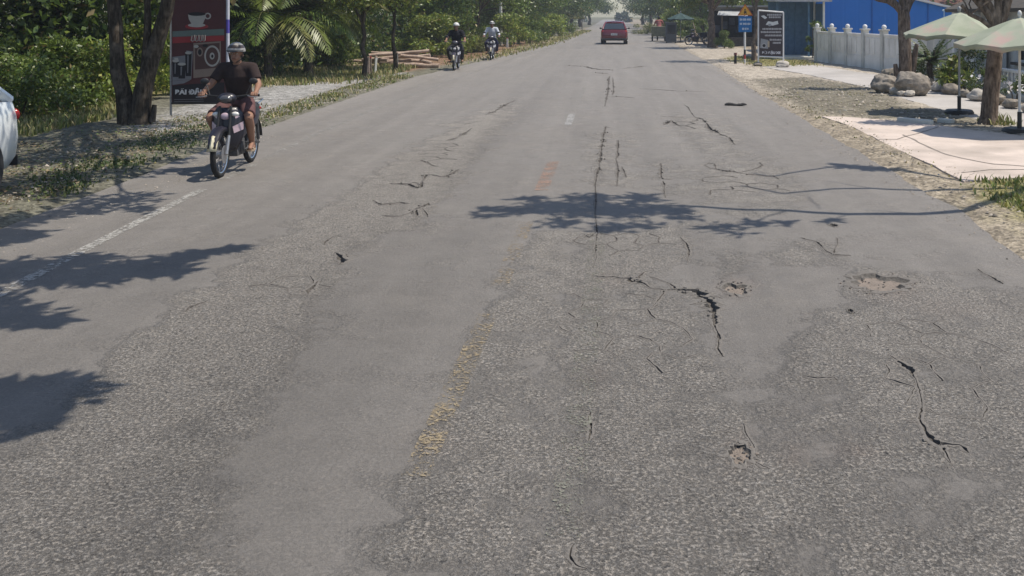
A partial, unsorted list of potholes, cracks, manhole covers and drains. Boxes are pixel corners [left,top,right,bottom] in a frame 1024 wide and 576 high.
crack [557,233,725,373]
crack [865,317,1006,462]
crack [639,88,736,145]
pothole [837,271,922,296]
pothole [722,438,758,469]
pothole [715,281,754,297]
crack [372,100,516,220]
